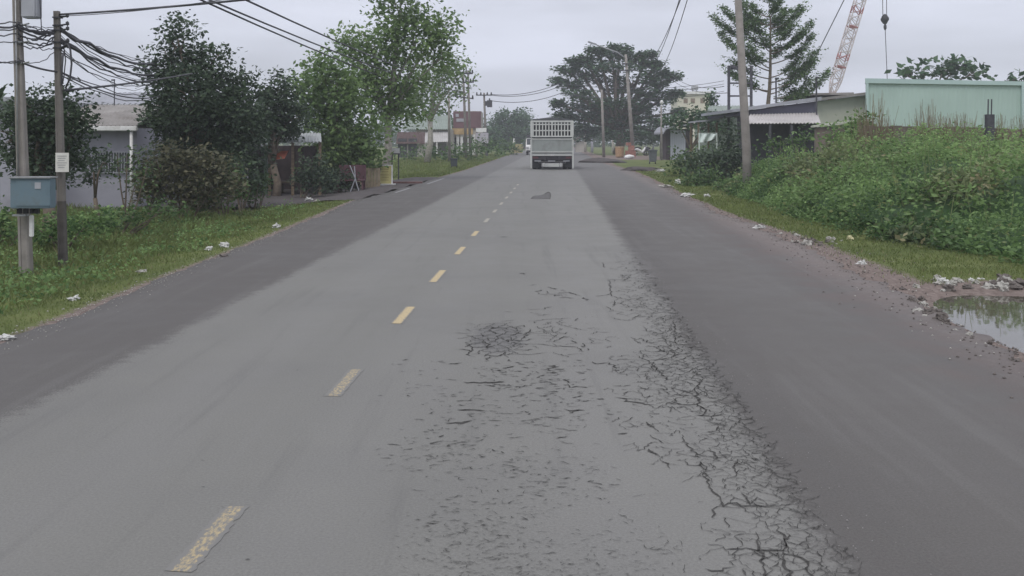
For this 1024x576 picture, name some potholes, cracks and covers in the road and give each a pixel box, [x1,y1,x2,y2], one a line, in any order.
crack [557,251,865,576]
crack [376,306,680,576]
